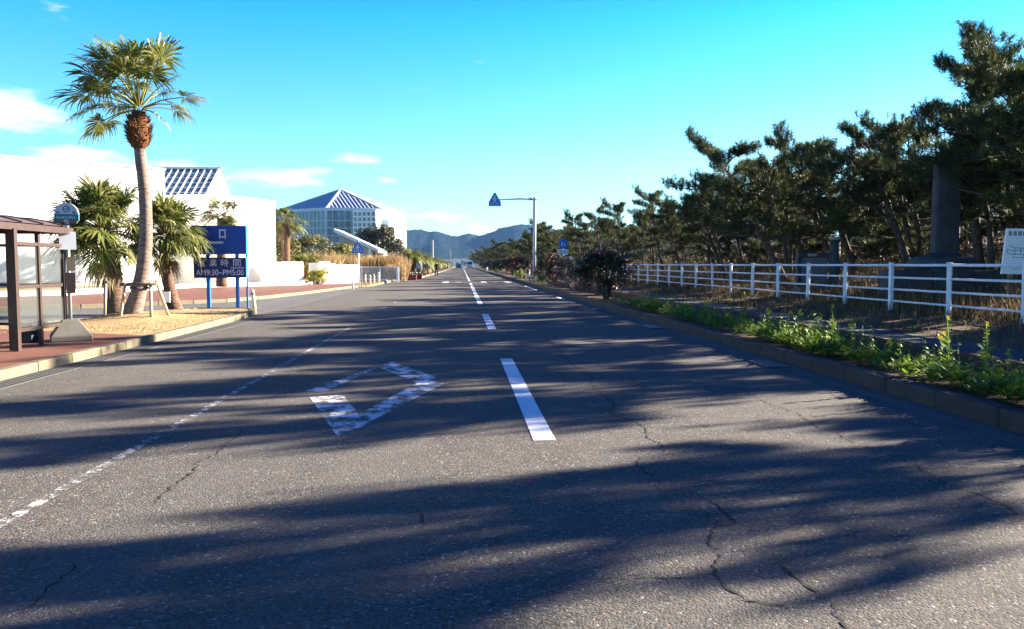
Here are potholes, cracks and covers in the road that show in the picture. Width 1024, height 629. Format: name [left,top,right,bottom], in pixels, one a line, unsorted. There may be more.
crack [614,496,849,628]
crack [636,457,676,493]
crack [22,560,78,613]
crack [152,428,247,507]
